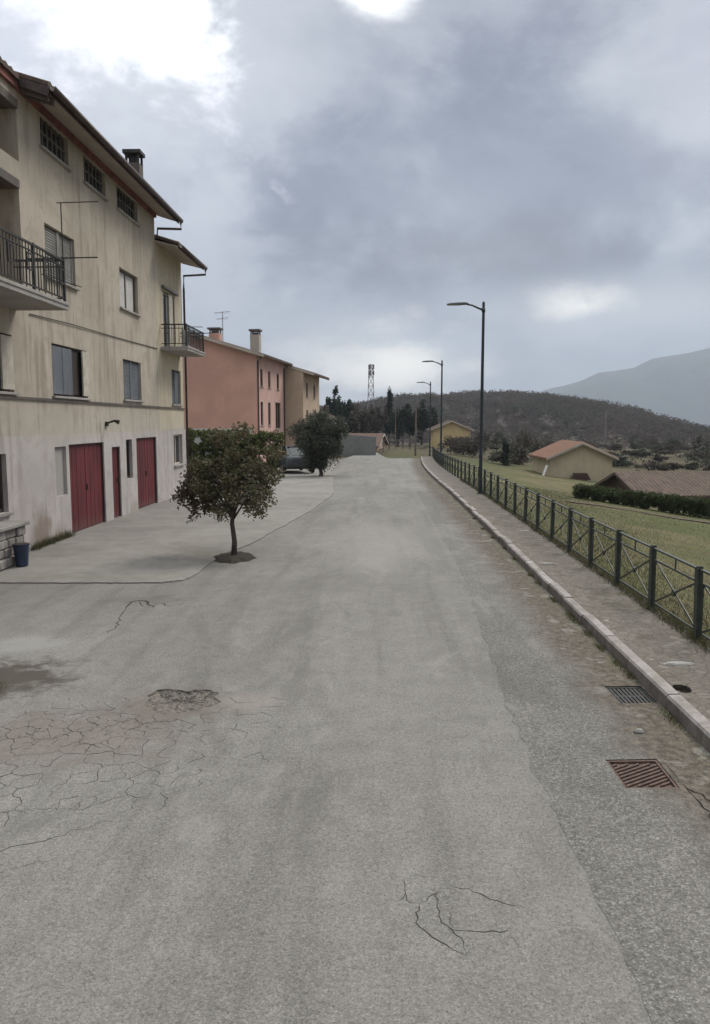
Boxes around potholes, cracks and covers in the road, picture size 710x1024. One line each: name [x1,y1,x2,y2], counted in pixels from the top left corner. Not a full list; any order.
crack [107,599,170,633]
pothole [146,689,221,715]
drain grate [605,686,657,704]
crack [402,882,518,955]
